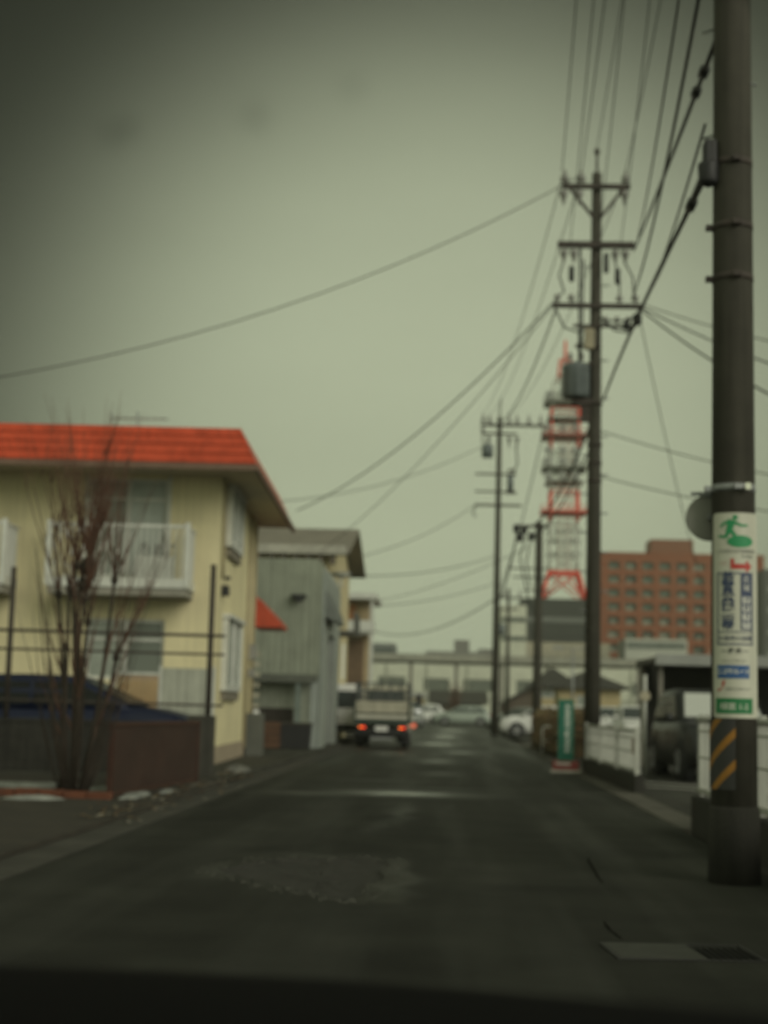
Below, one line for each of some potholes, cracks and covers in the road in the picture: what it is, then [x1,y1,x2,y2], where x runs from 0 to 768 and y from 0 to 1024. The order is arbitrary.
crack [587,858,603,883]
